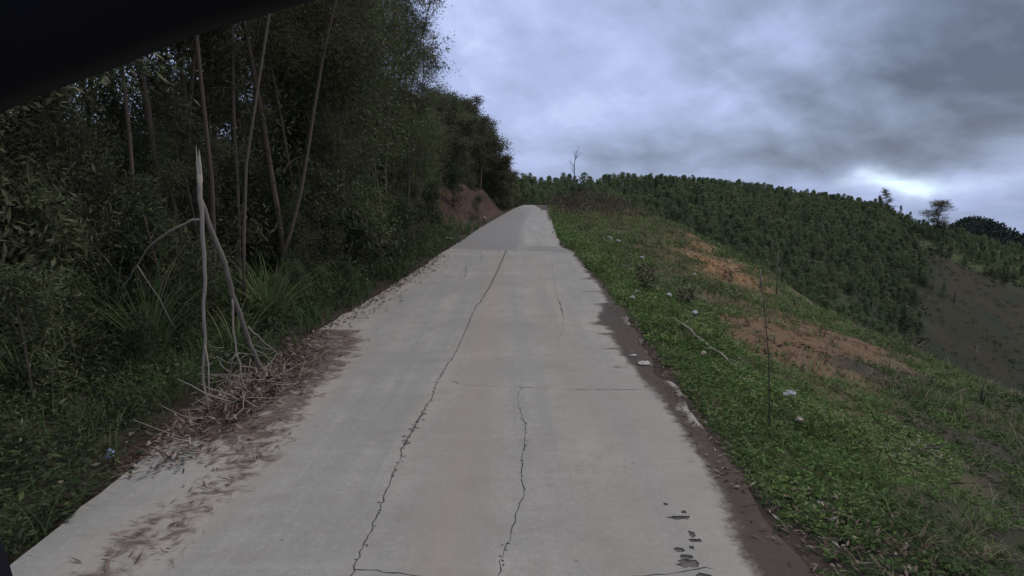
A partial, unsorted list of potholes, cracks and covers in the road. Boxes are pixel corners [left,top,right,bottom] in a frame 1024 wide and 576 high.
pothole [676,559,700,568]
crack [350,248,711,576]
